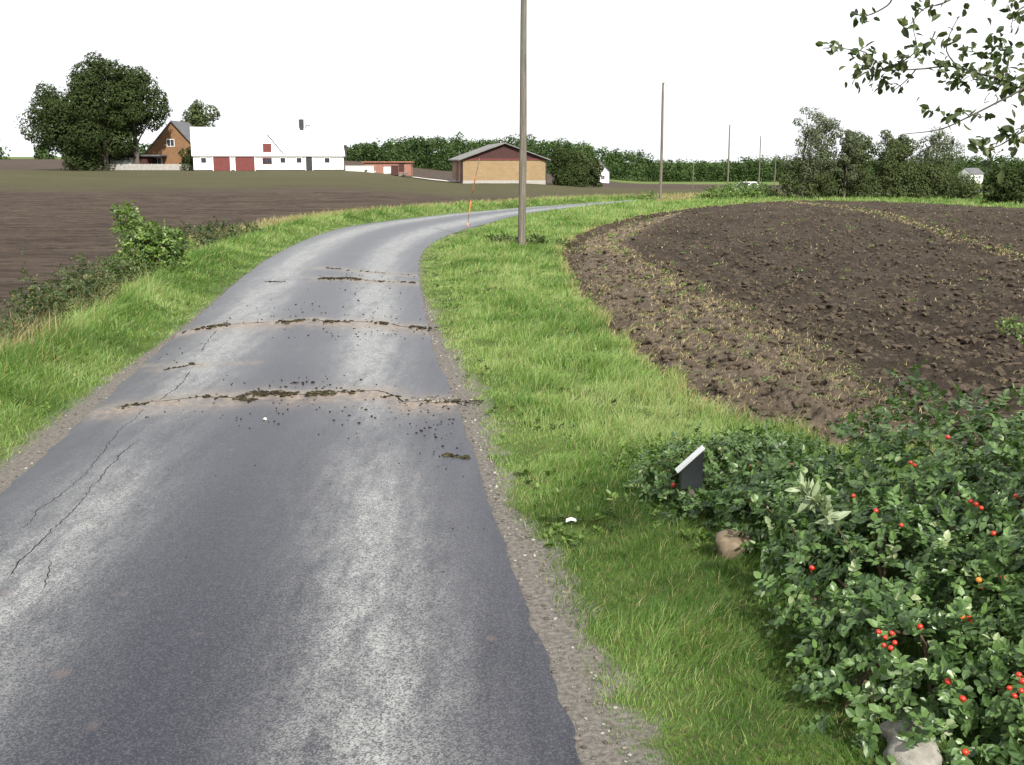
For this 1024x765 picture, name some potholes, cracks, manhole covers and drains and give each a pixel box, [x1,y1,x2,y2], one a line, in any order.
crack [318,267,416,283]
crack [7,318,484,592]
